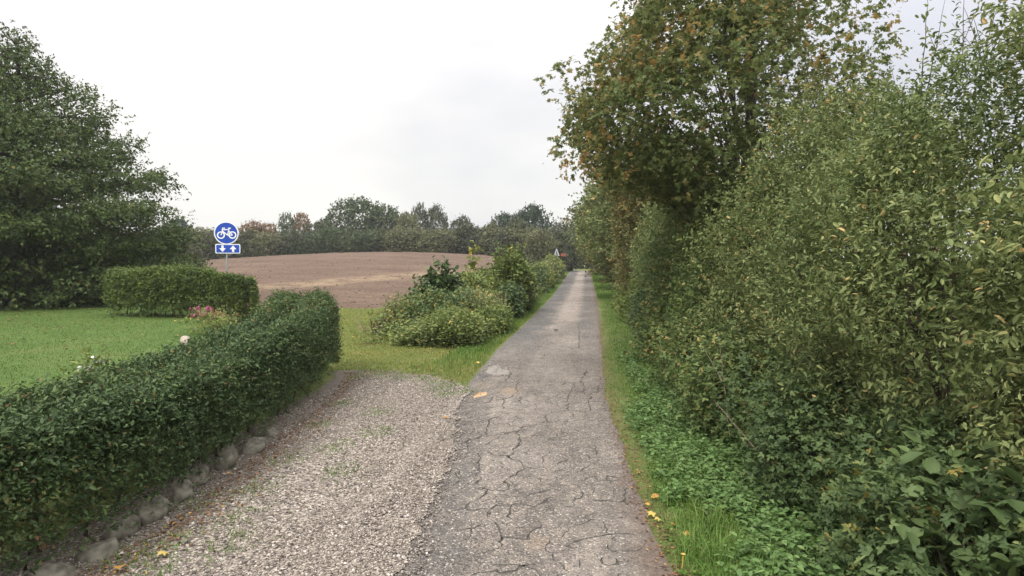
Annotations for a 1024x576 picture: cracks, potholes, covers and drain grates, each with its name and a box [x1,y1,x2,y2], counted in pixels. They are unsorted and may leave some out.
crack [453,369,642,576]
